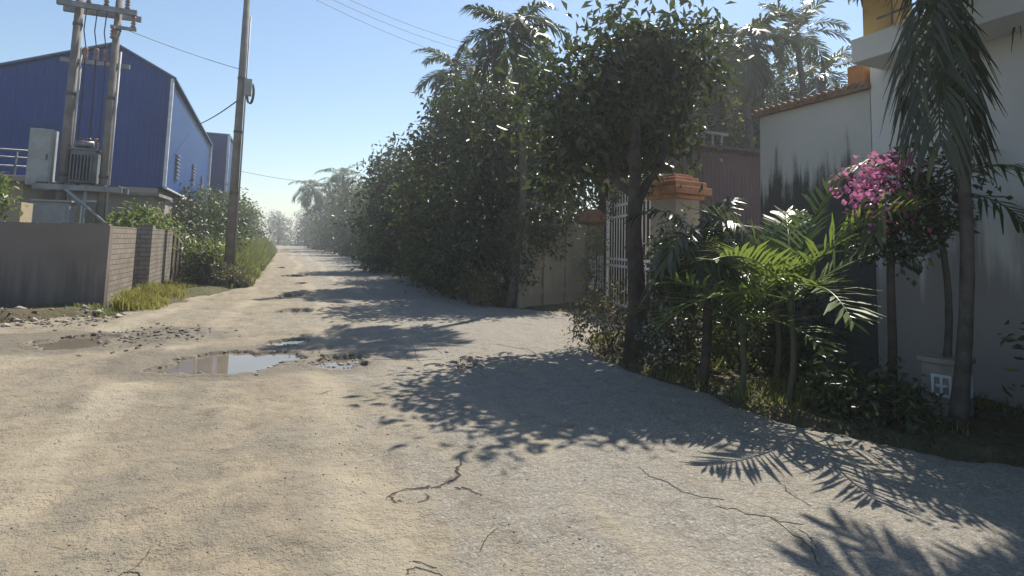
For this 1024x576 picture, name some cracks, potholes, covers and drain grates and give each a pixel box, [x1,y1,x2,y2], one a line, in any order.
crack [386,459,482,504]
pothole [256,337,318,348]
crack [118,549,150,576]
pothole [14,332,129,353]
pothole [297,351,378,373]
pothole [131,349,323,378]
crack [639,458,819,566]
crack [406,561,443,576]
